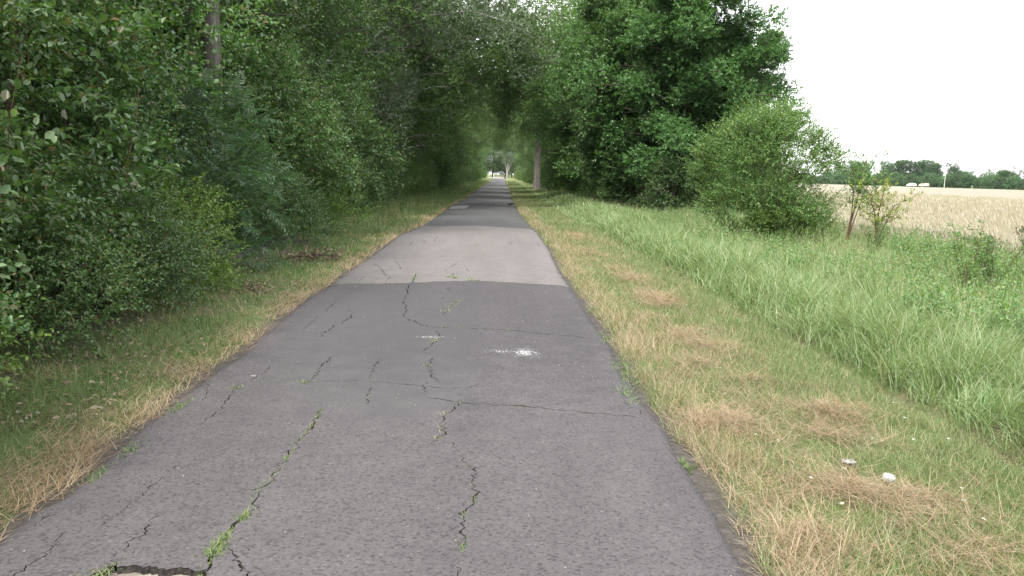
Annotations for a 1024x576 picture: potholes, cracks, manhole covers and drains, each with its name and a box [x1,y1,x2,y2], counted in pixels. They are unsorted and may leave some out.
crack [453,443,480,576]
crack [205,412,319,576]
crack [355,237,641,447]
pothole [91,564,207,576]
